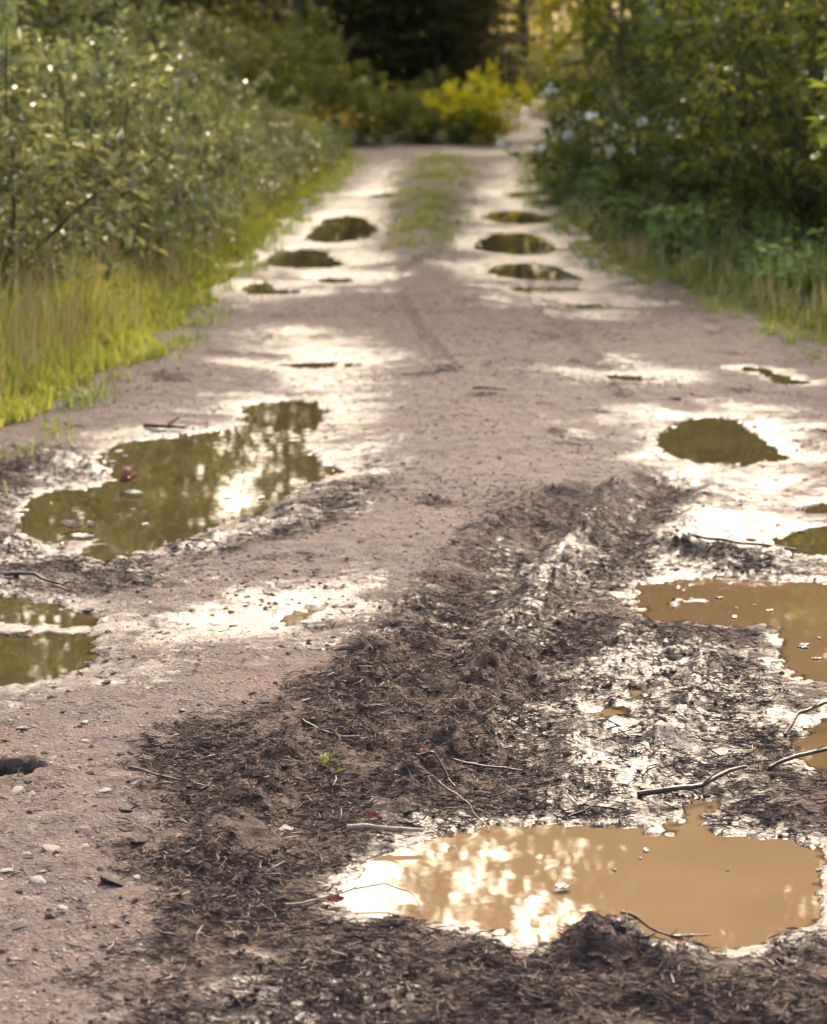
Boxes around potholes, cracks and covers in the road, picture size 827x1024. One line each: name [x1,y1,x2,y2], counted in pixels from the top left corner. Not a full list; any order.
pothole [1,397,360,561]
pothole [299,215,385,243]
pothole [234,280,305,295]
pothole [643,414,797,467]
pothole [0,592,125,688]
pothole [611,567,827,683]
pothole [477,210,556,225]
pothole [0,754,67,783]
pothole [253,247,350,269]
pothole [466,231,564,256]
pothole [308,790,827,958]
pothole [742,517,827,557]
